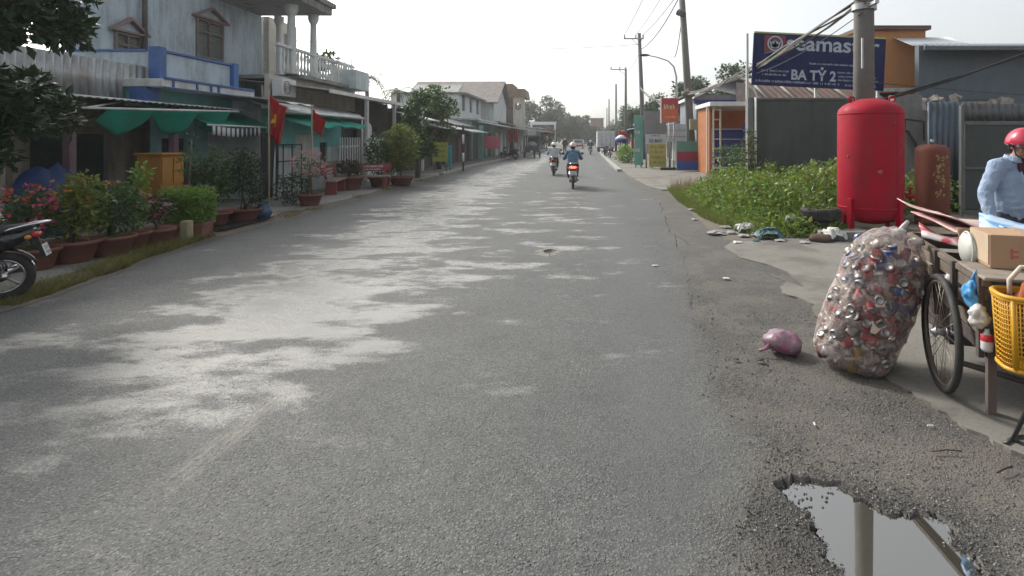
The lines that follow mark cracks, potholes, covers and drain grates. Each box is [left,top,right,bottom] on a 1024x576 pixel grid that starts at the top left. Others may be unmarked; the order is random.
pothole [773,472,990,576]
pothole [535,247,563,257]
